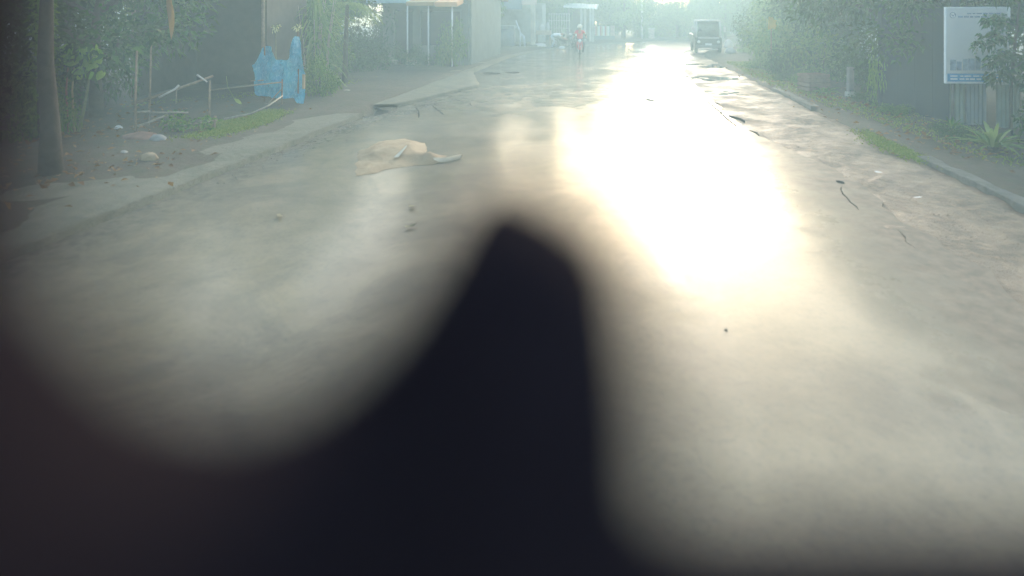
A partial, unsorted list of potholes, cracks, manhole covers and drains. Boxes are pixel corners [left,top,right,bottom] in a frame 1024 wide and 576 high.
crack [415,87,477,118]
crack [691,88,760,136]
